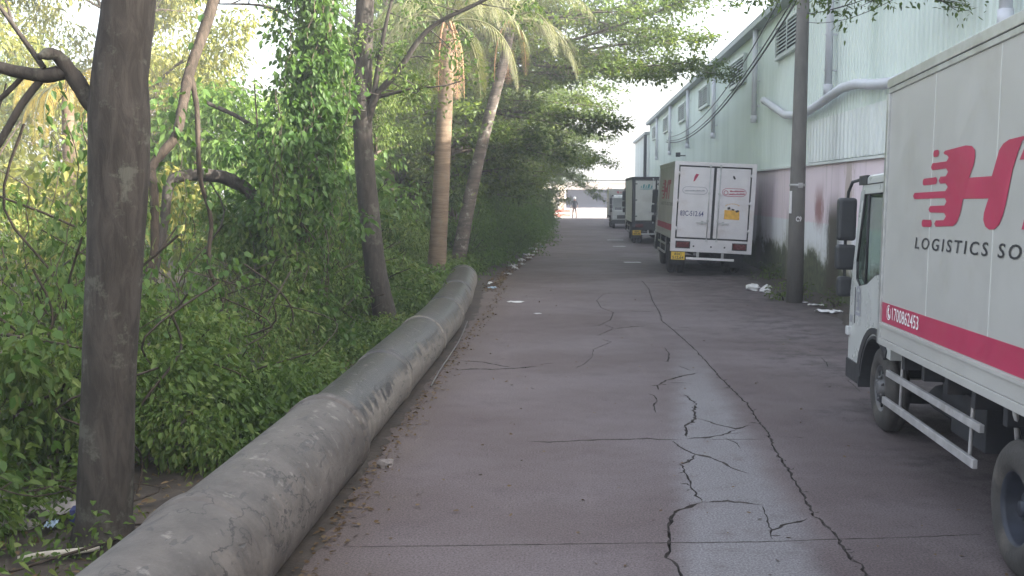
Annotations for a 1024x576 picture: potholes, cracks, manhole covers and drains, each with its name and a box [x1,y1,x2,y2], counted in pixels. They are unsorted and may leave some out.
crack [457,361,548,370]
crack [531,282,870,576]
